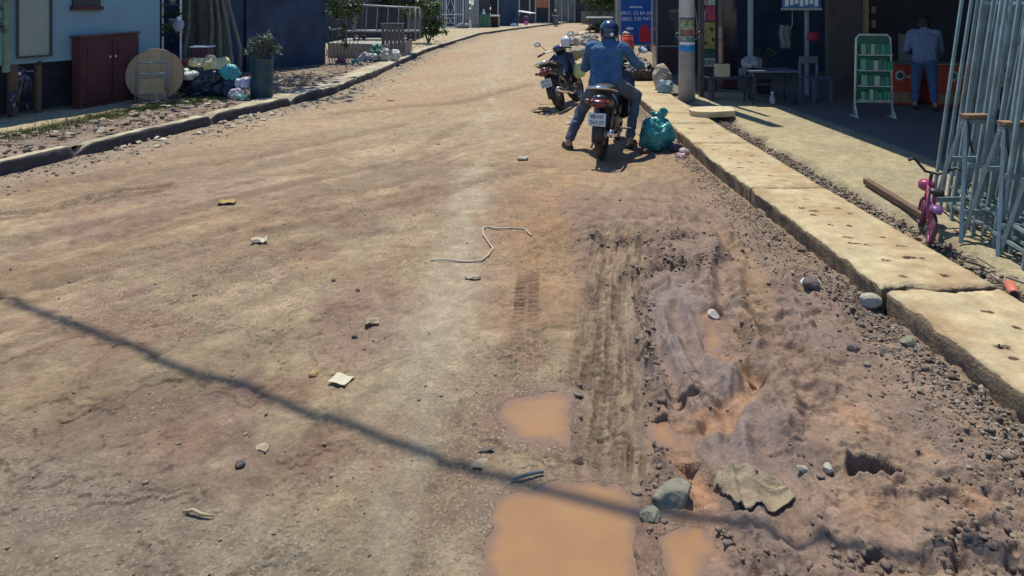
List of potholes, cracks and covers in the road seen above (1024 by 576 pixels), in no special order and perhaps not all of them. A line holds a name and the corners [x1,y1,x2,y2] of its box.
pothole [844,452,906,476]
pothole [657,526,719,576]
pothole [483,479,643,576]
pothole [496,390,574,448]
pothole [643,415,681,448]
